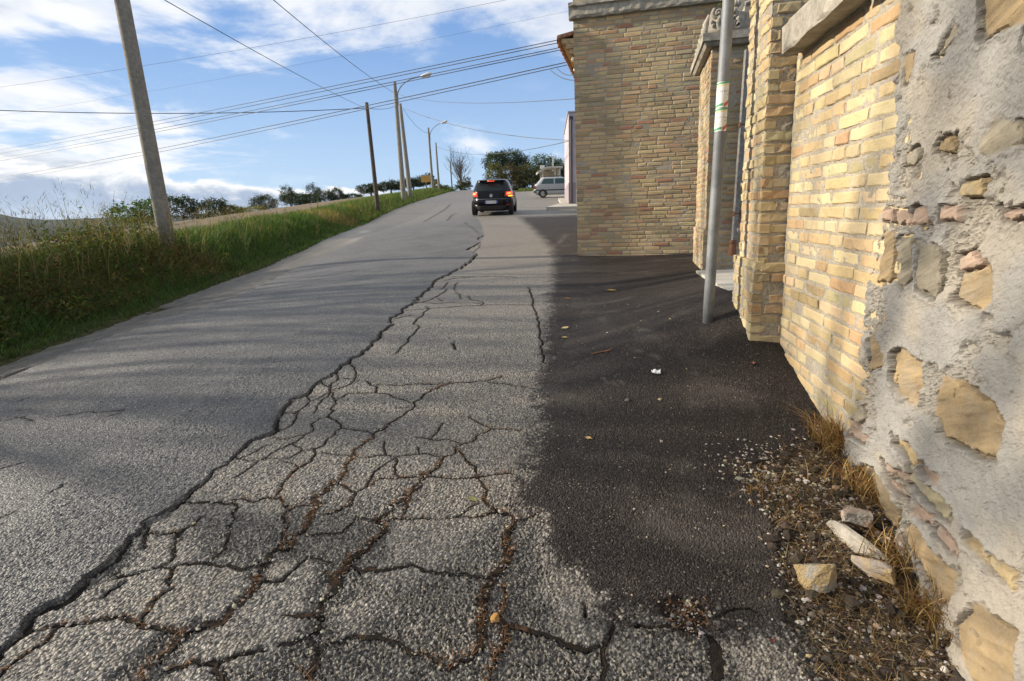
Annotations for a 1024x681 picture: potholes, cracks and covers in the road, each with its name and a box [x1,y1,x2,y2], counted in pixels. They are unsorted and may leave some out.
crack [0,224,726,681]
